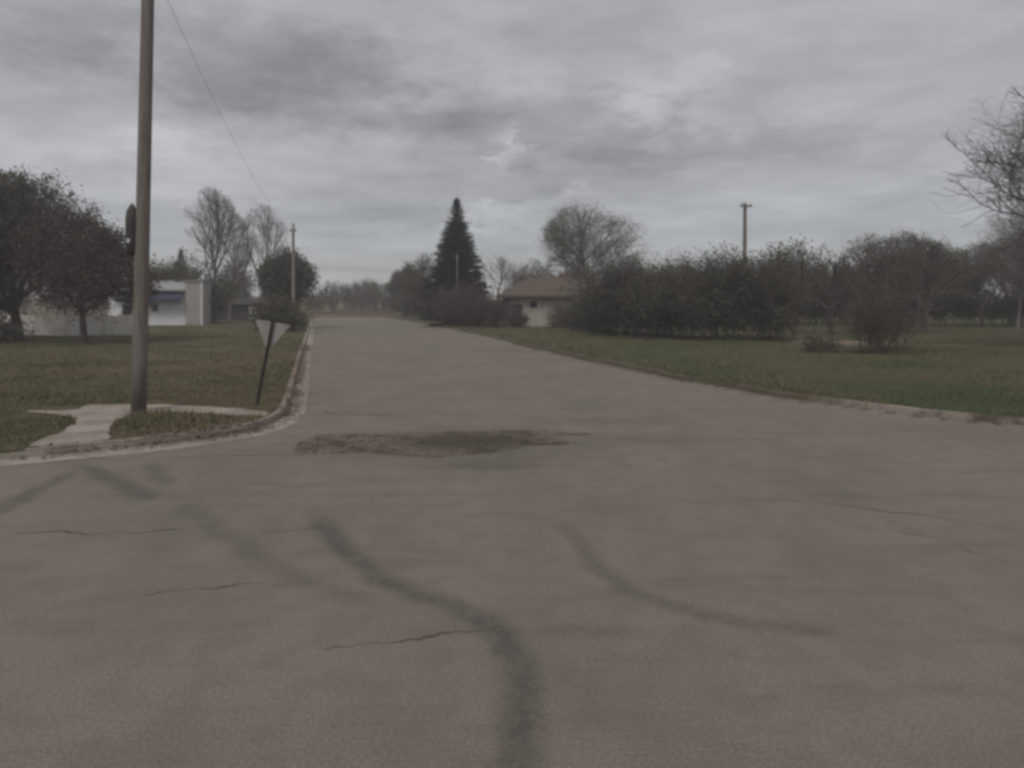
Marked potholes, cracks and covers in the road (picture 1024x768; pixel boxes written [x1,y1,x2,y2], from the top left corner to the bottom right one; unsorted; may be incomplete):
crack [322,625,506,650]
crack [141,582,262,596]
pothole [292,429,594,458]
crack [785,499,1012,555]
